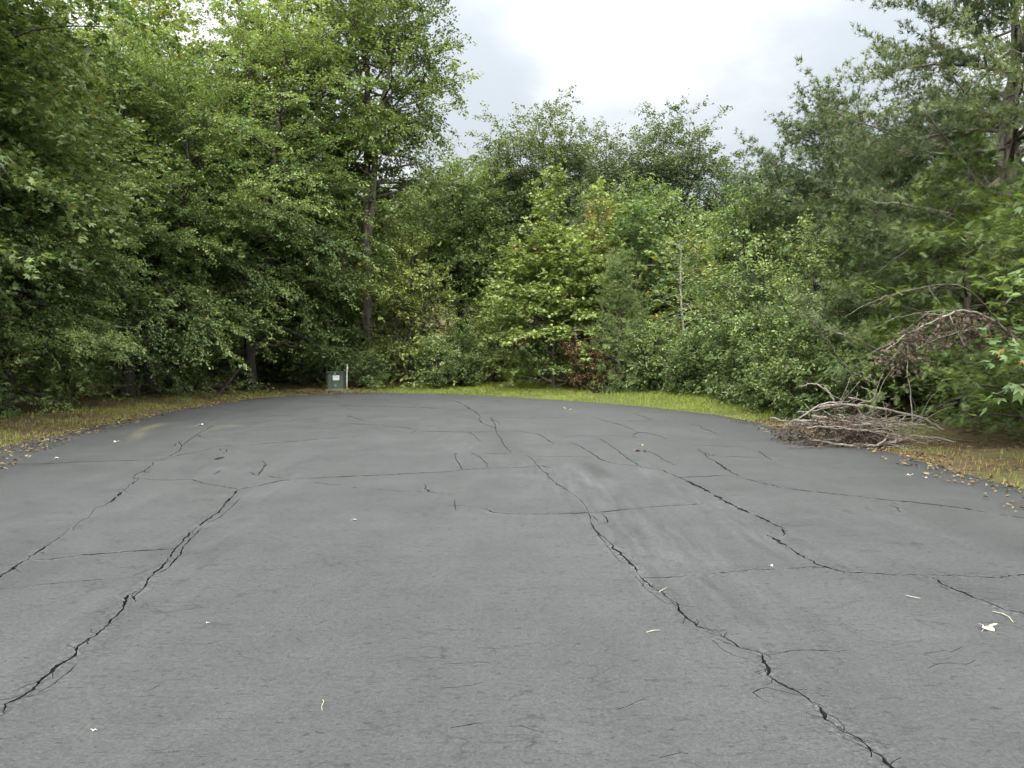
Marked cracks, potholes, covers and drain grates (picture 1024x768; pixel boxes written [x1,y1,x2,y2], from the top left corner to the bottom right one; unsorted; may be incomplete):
crack [0,400,1024,768]
